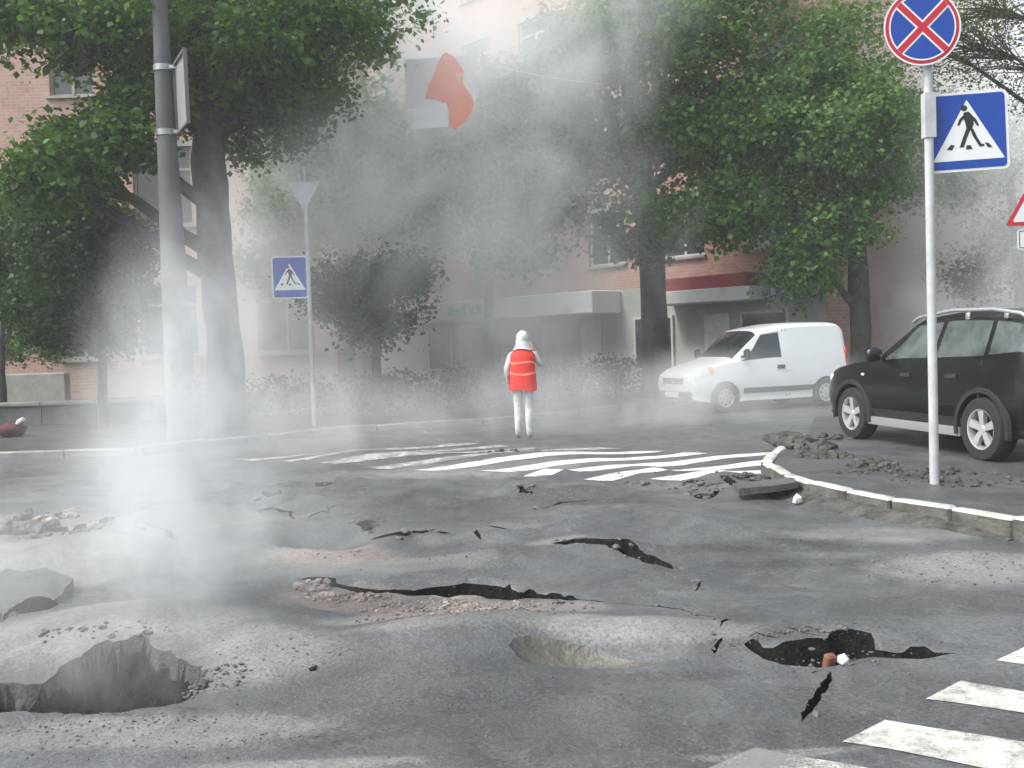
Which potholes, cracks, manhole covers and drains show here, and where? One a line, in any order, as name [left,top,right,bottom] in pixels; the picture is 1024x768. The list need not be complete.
pothole [744,625,954,673]
pothole [682,481,723,500]
crack [796,672,840,721]
crack [554,537,833,658]
pothole [509,636,664,669]
pothole [0,620,253,731]
crack [370,528,448,540]
